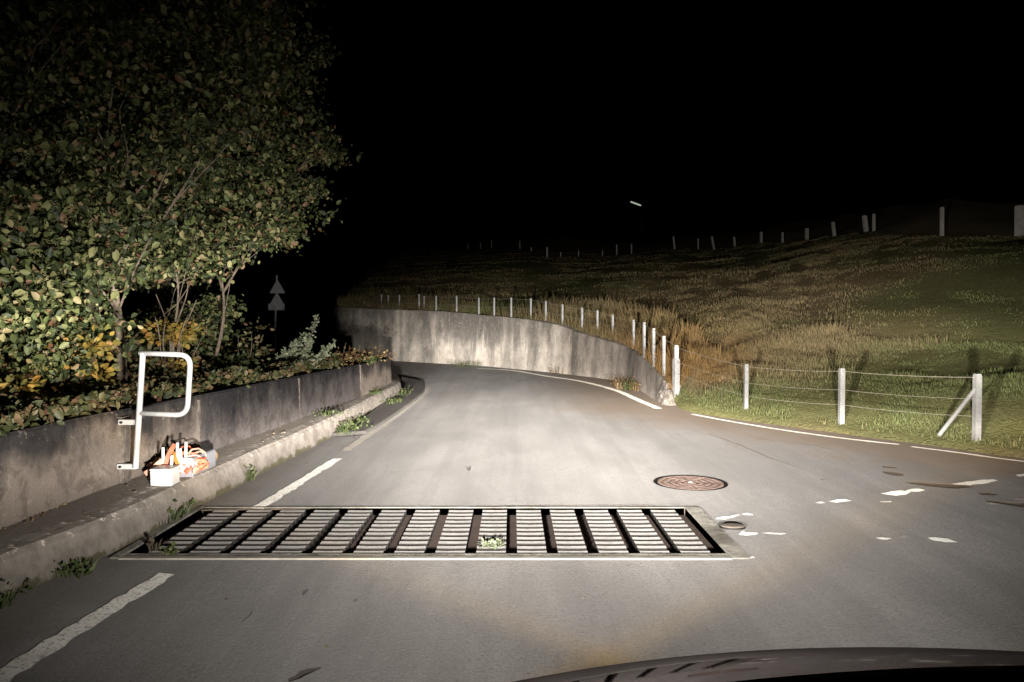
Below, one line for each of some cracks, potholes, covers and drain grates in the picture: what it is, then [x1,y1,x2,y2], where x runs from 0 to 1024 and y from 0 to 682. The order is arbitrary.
manhole cover [653,475,728,491]
